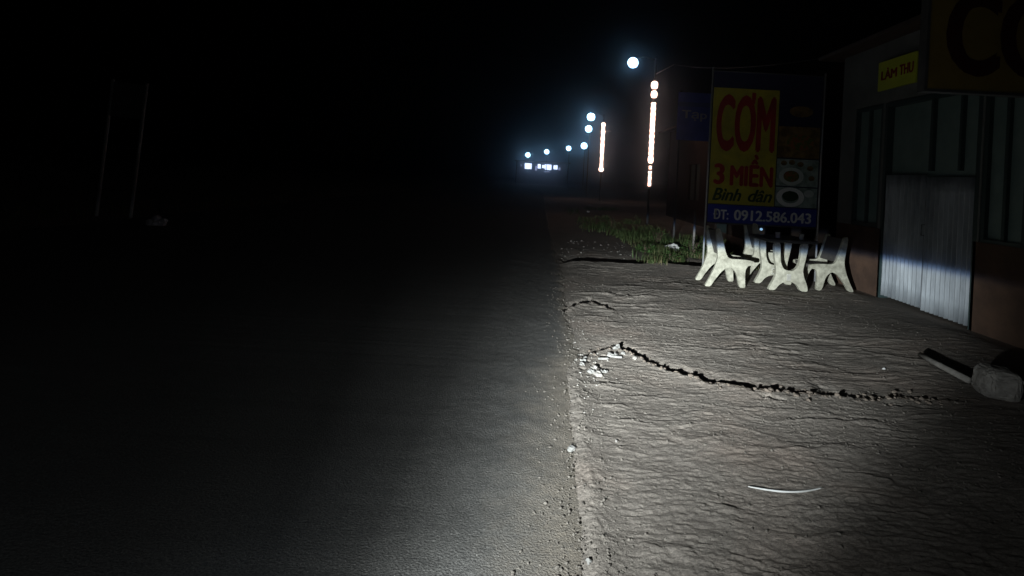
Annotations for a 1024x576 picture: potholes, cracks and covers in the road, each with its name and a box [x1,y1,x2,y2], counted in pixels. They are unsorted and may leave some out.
crack [579,346,1005,401]
